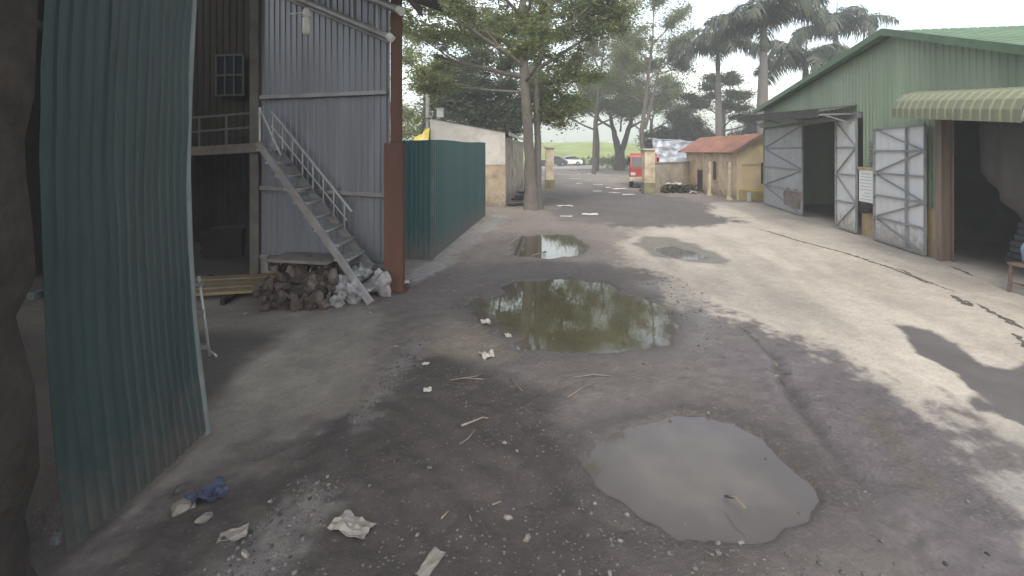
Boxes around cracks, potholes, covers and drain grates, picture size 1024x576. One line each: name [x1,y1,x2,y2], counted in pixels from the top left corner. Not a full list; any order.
pothole [565,407,840,555]
pothole [499,231,595,261]
pothole [649,244,715,260]
crack [760,229,1024,347]
pothole [458,276,688,358]
